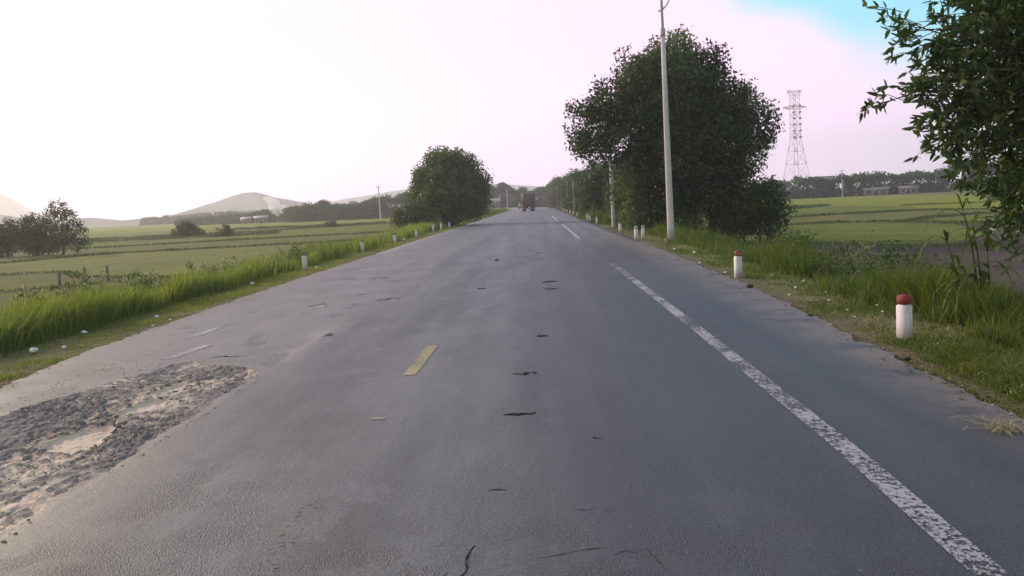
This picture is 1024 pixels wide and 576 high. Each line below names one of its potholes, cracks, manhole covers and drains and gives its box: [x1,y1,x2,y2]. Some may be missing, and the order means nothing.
crack [537,547,669,572]
crack [443,545,476,576]
pothole [22,419,127,460]
pothole [94,395,181,420]
pothole [146,380,200,395]
